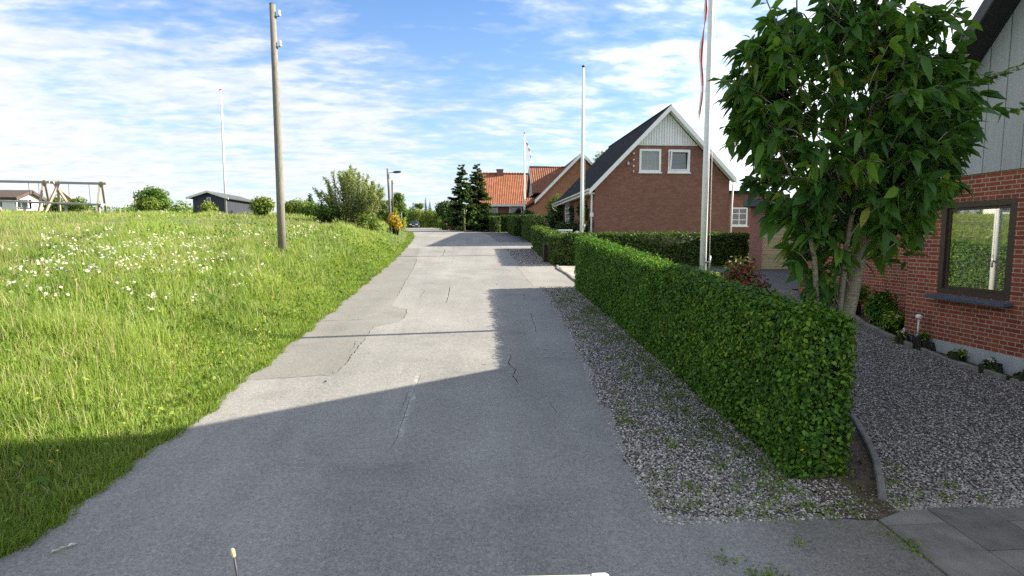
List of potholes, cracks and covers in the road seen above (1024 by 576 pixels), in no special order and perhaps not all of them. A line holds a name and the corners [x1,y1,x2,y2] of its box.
crack [259,260,425,380]
